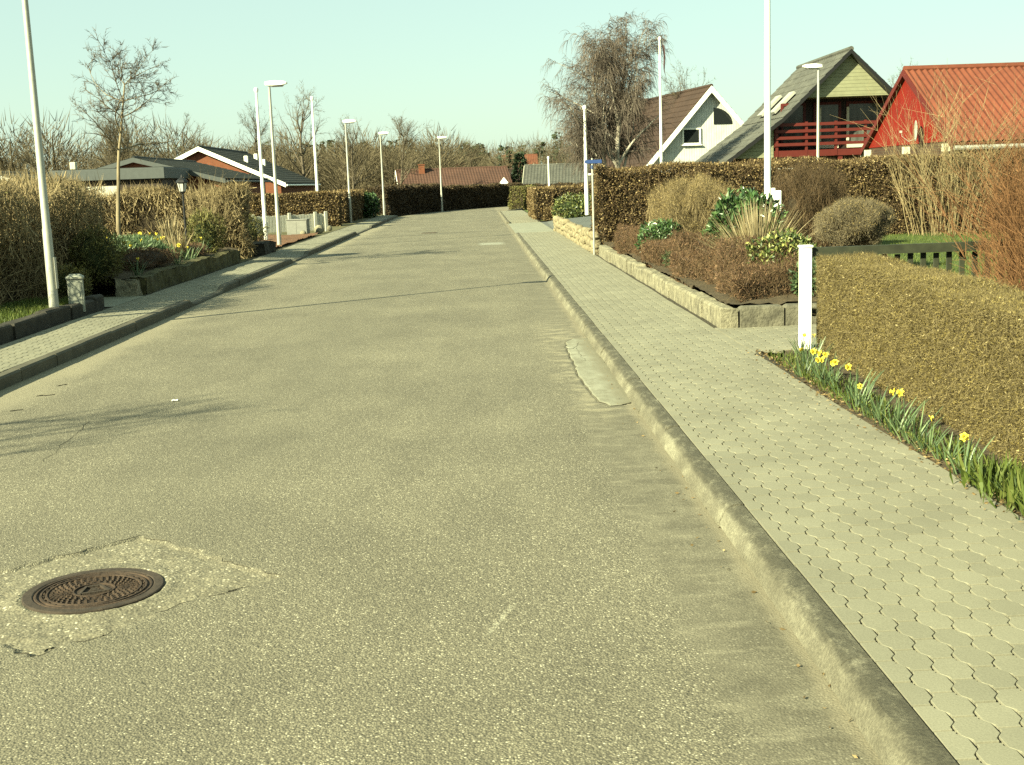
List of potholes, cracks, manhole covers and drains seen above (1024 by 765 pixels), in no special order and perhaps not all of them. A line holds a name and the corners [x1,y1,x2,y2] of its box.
manhole cover [21,568,165,615]
